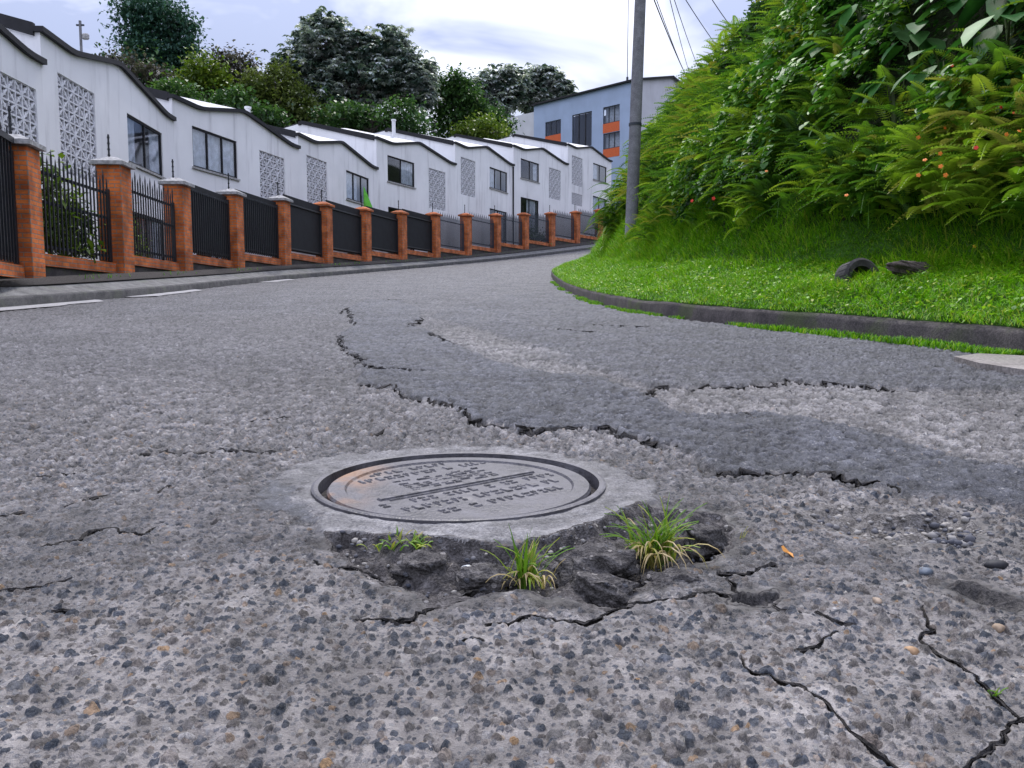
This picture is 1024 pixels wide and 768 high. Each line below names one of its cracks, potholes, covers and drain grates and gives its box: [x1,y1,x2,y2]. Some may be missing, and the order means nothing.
manhole cover [311,452,606,524]
crack [741,603,899,768]
crack [130,447,303,457]
crack [64,495,108,508]
crack [0,511,156,547]
crack [919,605,1024,768]
pothole [323,501,737,613]
